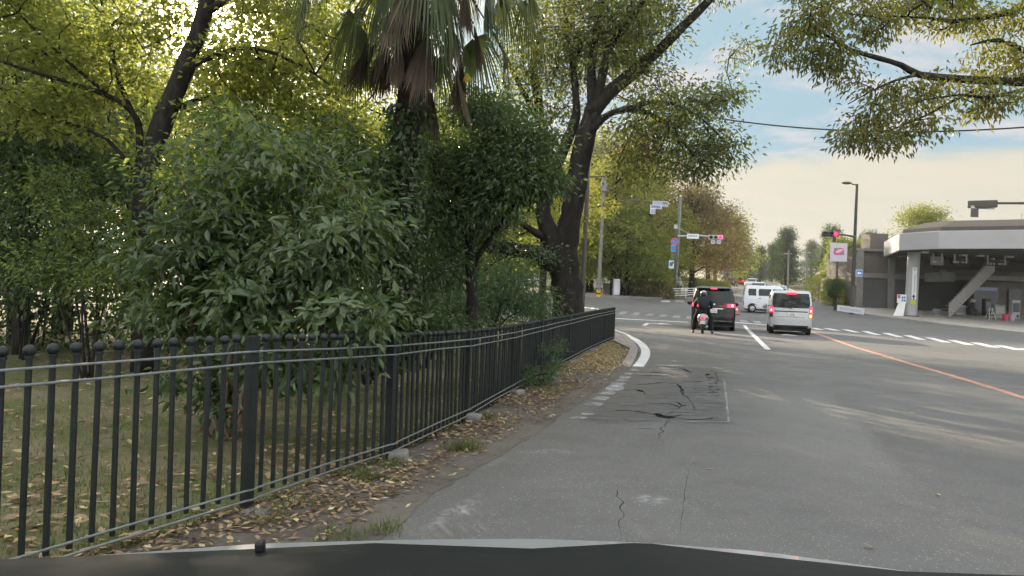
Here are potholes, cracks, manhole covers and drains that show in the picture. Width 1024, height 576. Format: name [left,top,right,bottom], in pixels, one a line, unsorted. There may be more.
crack [615,368,720,442]
